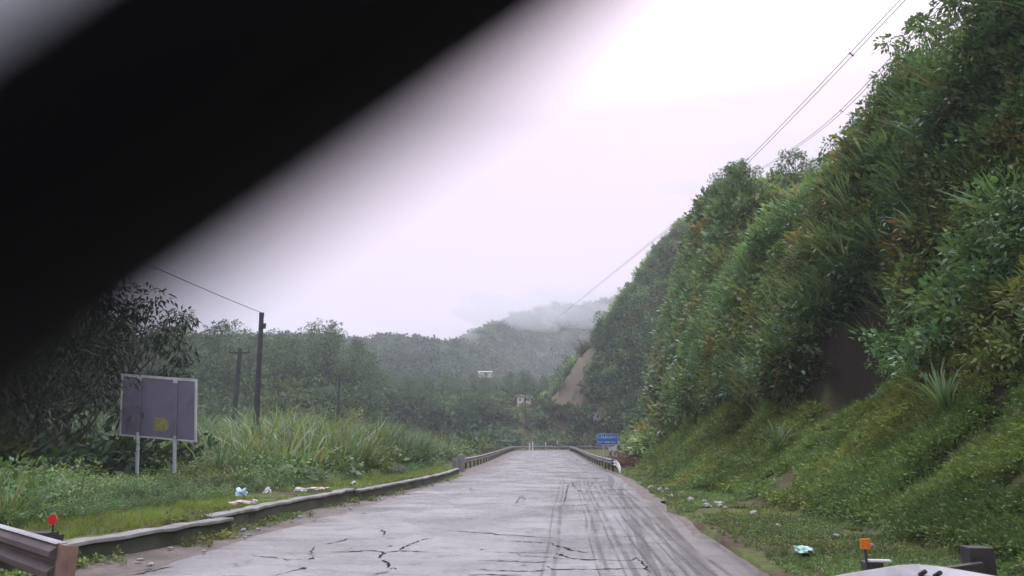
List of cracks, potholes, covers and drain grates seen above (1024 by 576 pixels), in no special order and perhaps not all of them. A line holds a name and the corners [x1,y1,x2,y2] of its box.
crack [448,530,650,575]
crack [253,529,427,576]
